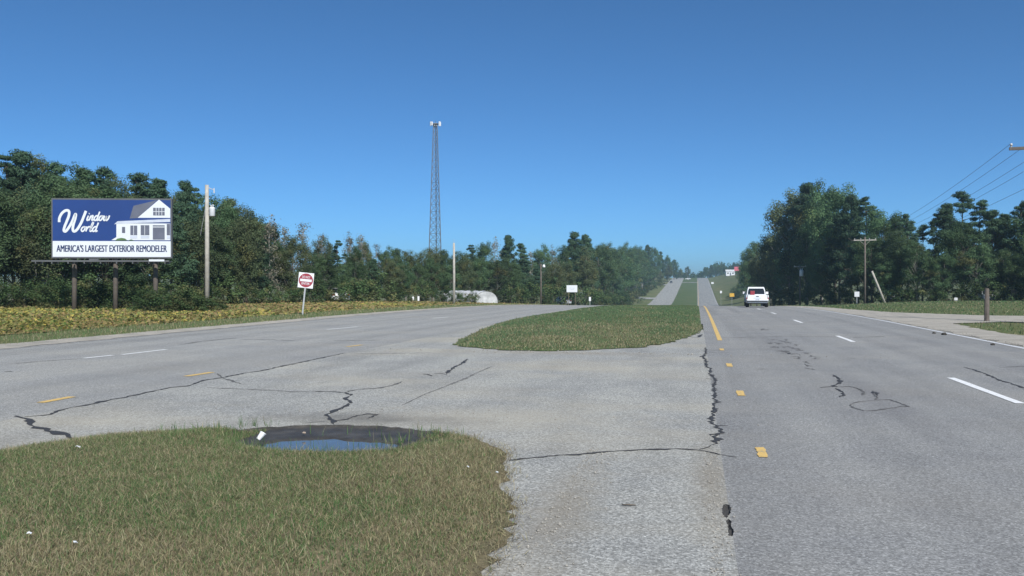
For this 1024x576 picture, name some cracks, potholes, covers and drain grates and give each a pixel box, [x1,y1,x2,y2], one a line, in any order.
crack [512,329,882,460]
crack [965,366,1024,388]
crack [829,375,910,411]
crack [16,353,402,439]
pothole [230,425,444,448]
